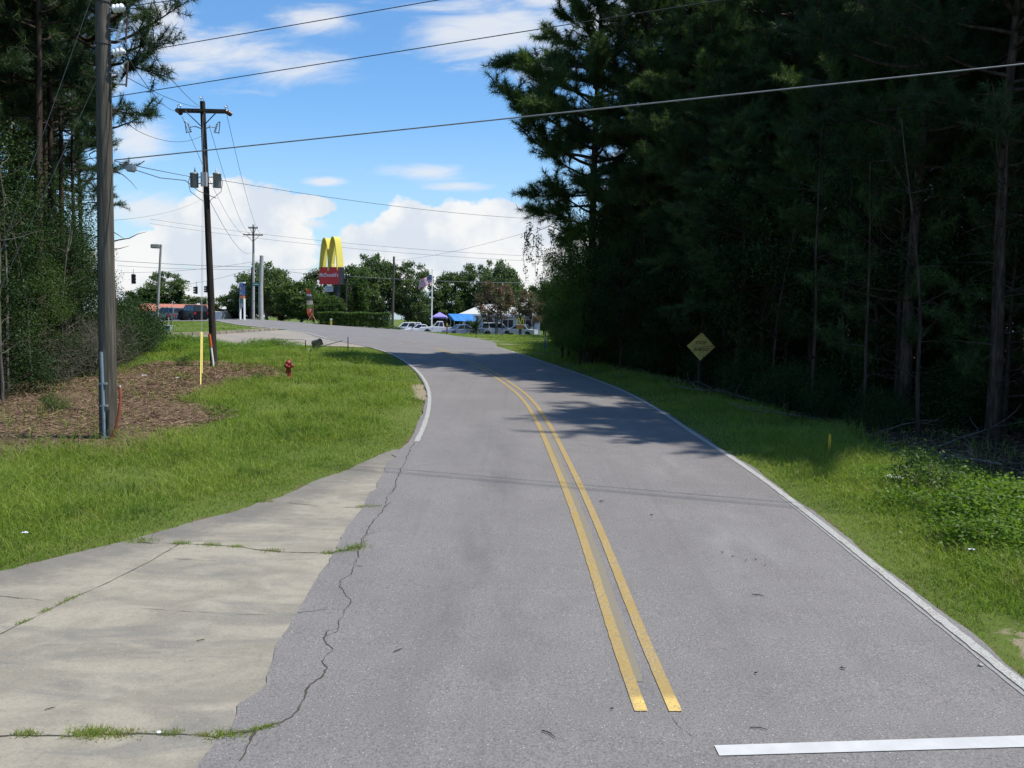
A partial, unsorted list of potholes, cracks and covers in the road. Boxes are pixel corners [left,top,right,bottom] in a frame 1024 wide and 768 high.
crack [146,442,415,762]
